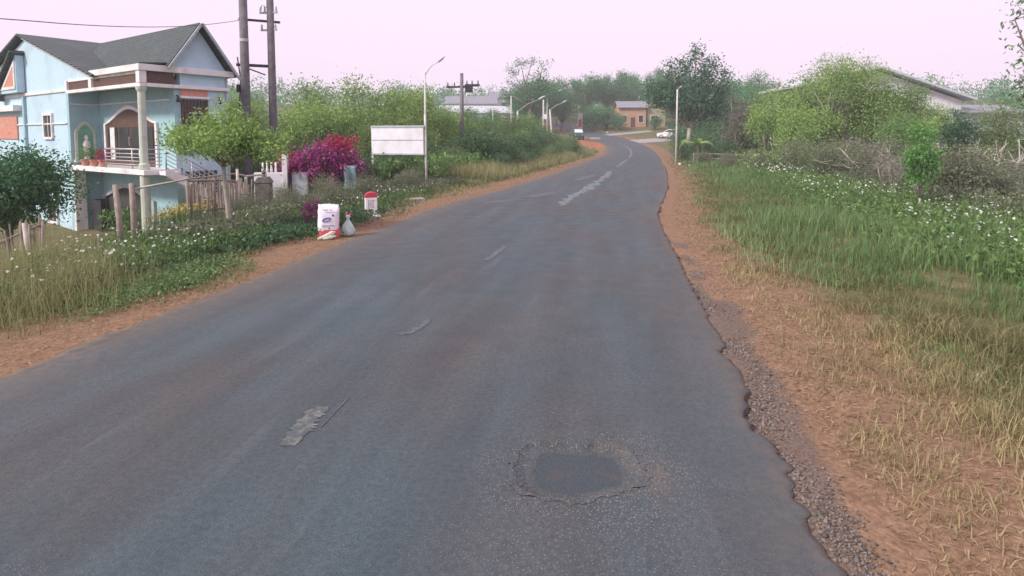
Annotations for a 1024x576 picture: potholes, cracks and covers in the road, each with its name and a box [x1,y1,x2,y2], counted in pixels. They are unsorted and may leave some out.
pothole [486,433,669,515]
